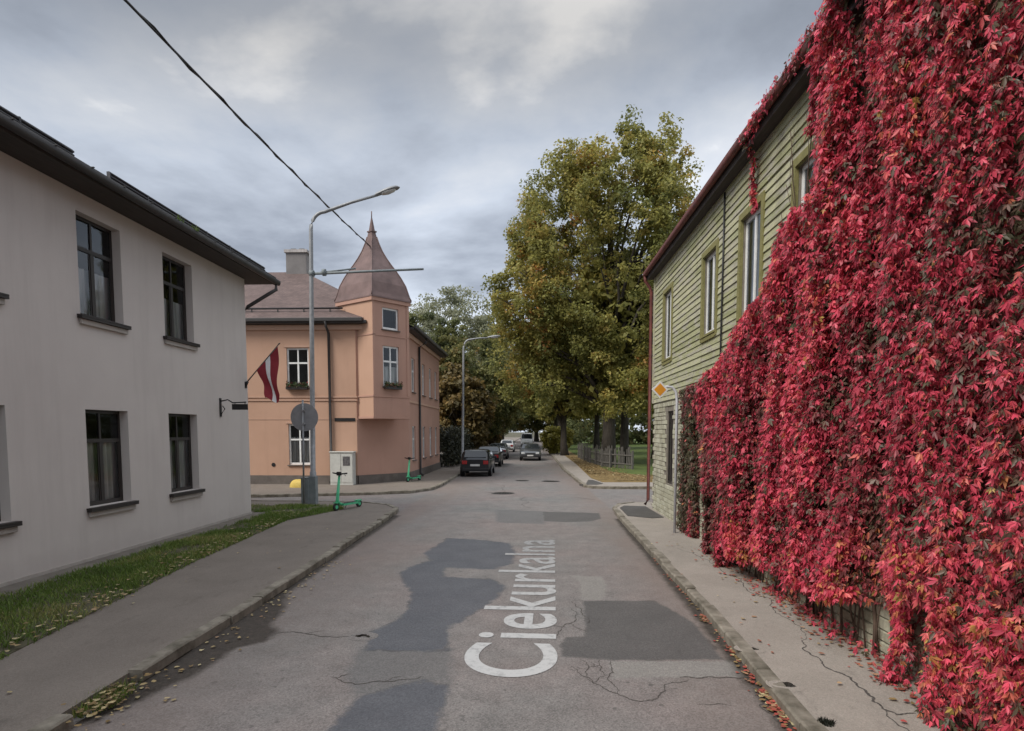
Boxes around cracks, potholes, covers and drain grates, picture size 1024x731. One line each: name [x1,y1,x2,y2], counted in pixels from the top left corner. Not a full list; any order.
crack [571,659,685,702]
